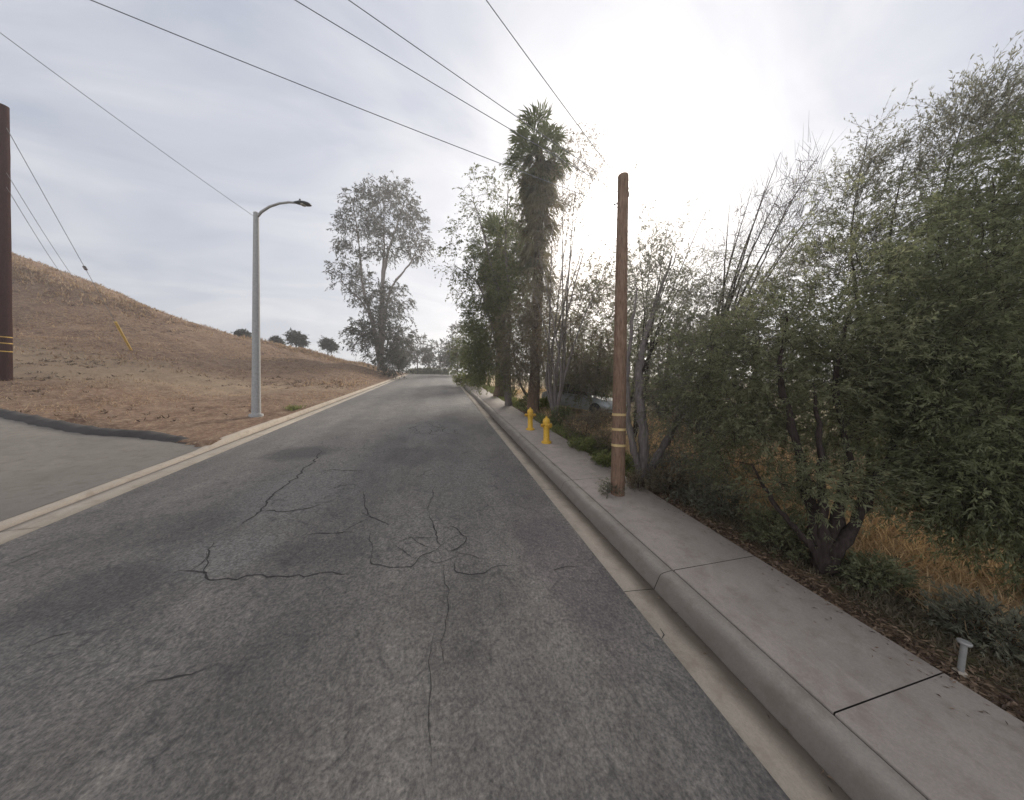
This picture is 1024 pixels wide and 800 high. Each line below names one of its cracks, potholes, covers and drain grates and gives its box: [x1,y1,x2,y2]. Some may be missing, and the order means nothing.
crack [177,543,343,580]
crack [135,665,214,689]
crack [243,449,509,766]
